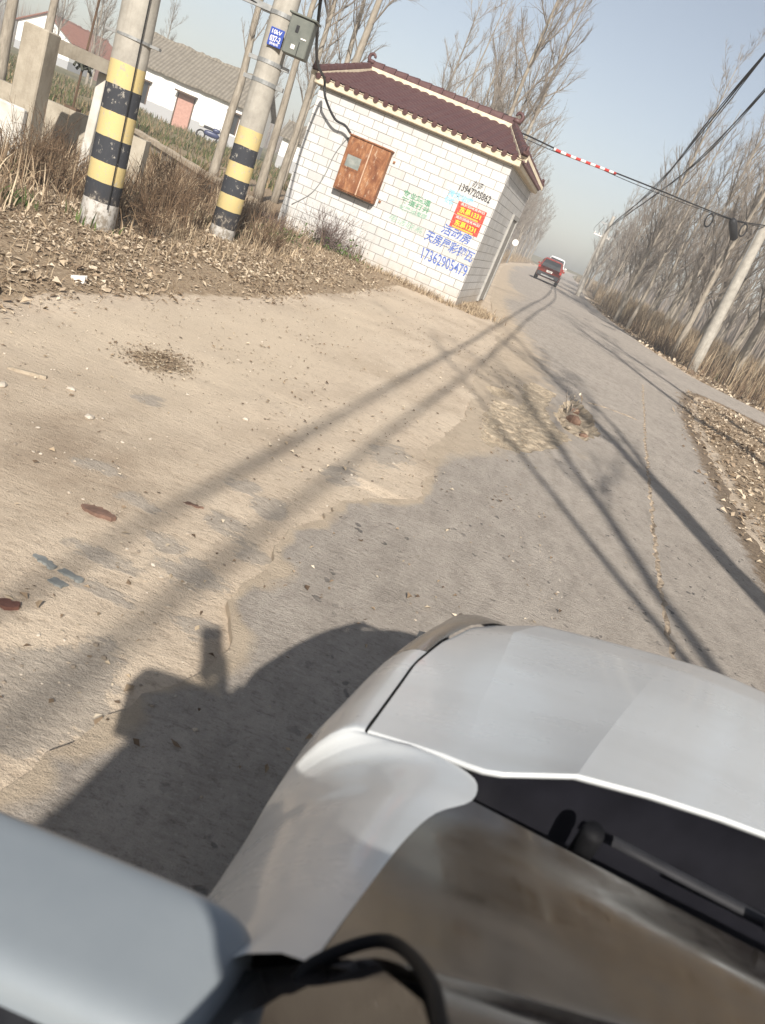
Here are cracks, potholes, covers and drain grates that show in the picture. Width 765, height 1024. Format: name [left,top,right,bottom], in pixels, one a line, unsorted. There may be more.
crack [477,383,677,660]
pothole [553,401,601,441]
